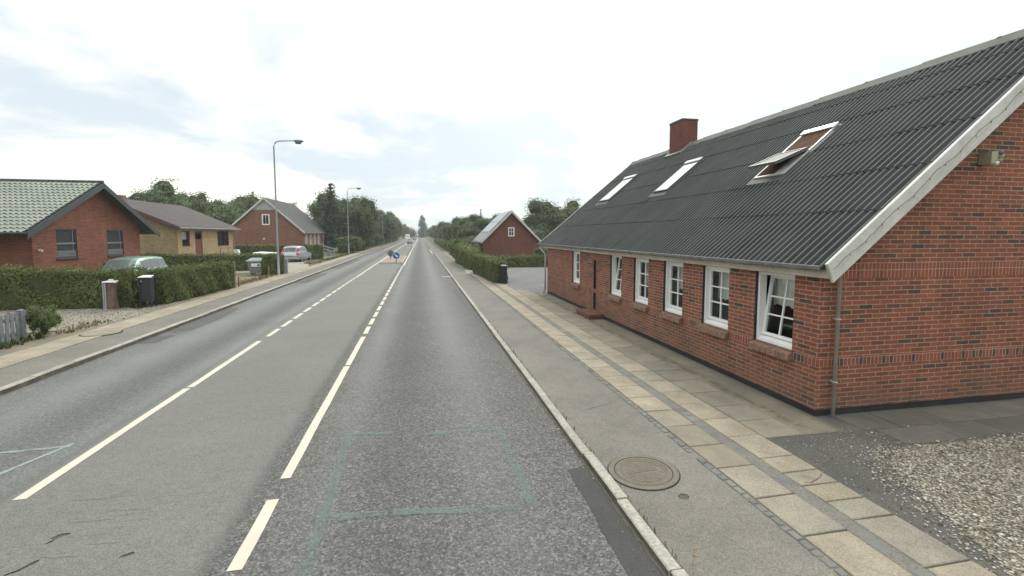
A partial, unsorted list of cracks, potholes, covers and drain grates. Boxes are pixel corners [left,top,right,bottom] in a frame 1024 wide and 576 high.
manhole cover [607,454,681,491]
